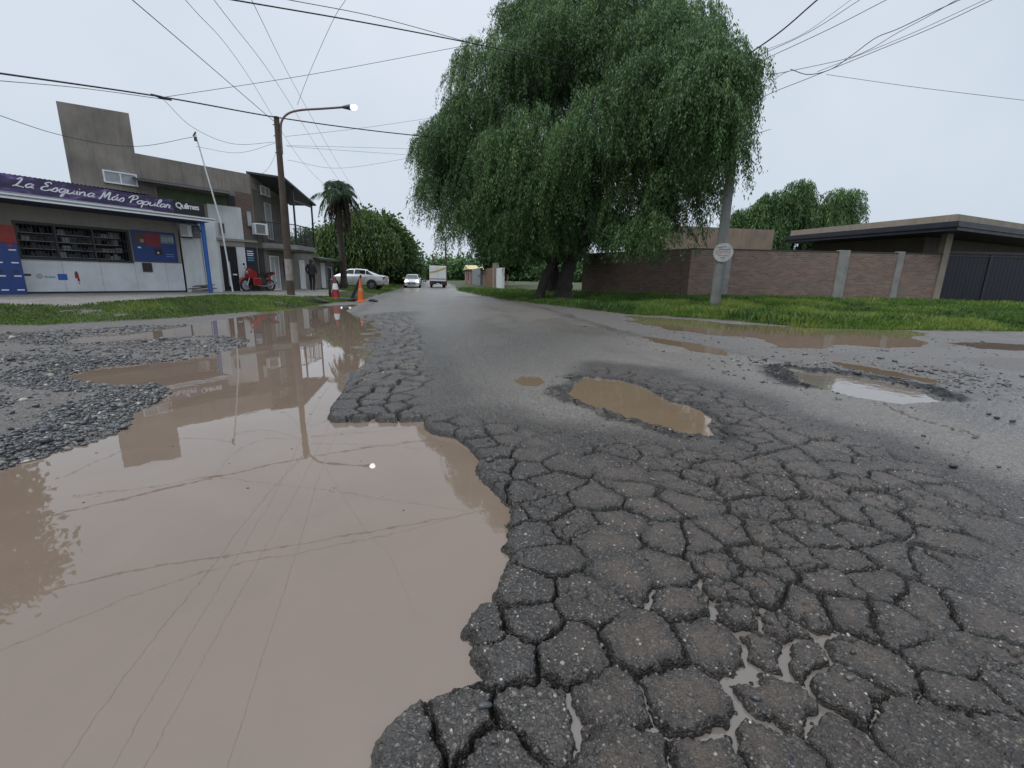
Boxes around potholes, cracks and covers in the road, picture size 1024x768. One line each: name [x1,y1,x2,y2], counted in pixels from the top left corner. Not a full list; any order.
crack [422,364,1024,768]
pothole [0,304,515,768]
crack [330,312,435,422]
pothole [562,375,722,439]
pothole [786,368,946,405]
pothole [513,376,547,387]
